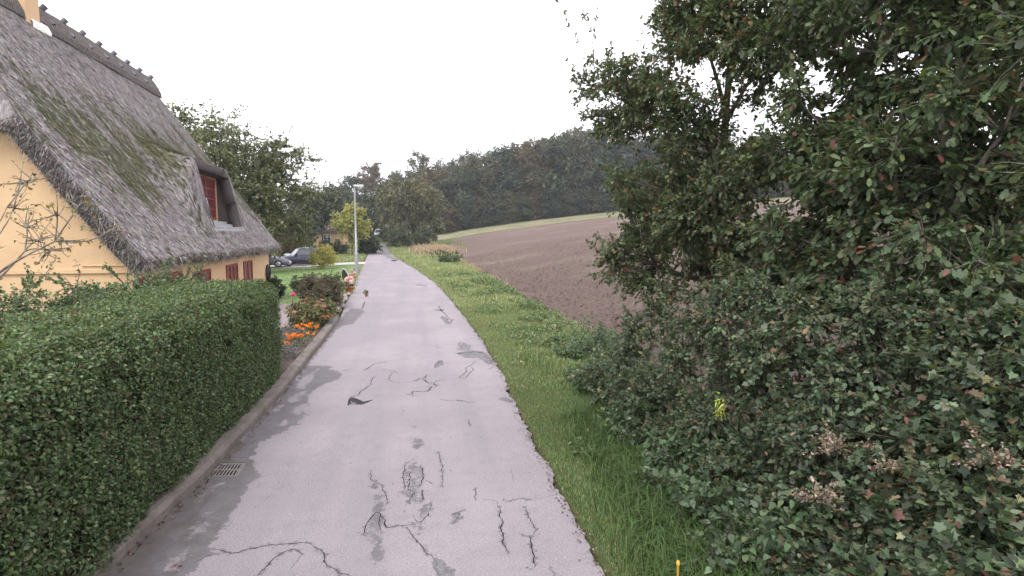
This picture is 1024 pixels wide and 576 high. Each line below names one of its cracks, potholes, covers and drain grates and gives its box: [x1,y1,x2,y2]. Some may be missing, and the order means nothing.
crack [363,452,444,557]
crack [352,362,438,397]
crack [194,542,350,576]
crack [452,490,554,566]
drain grate [209,463,245,476]
pothole [347,397,372,406]
